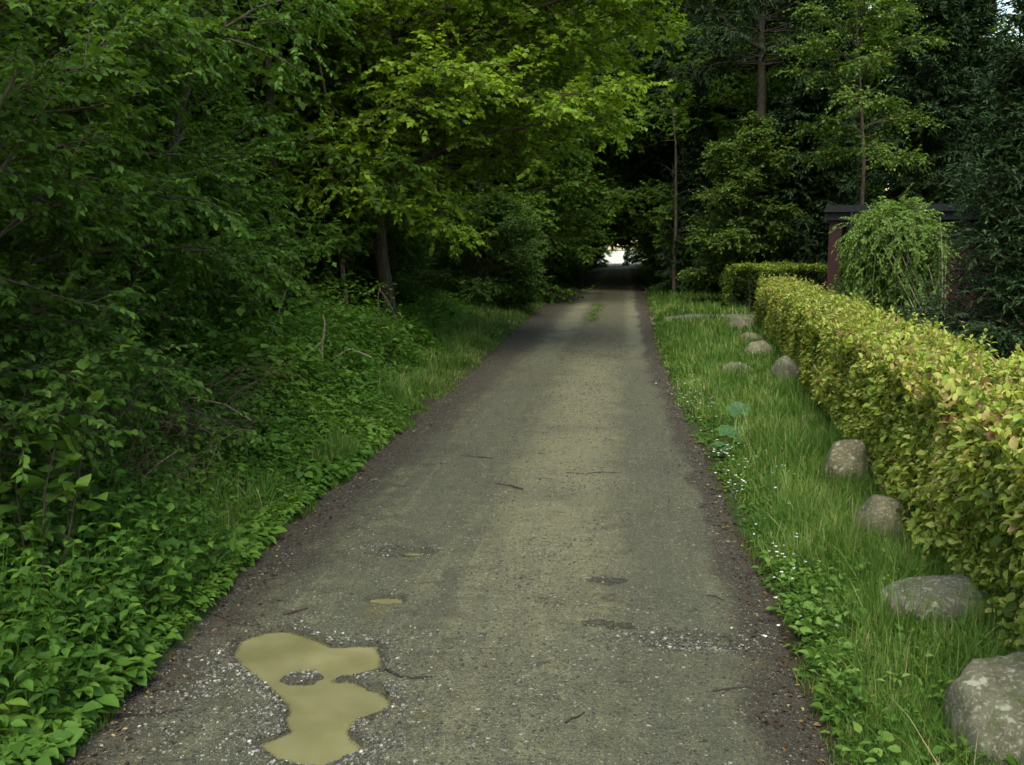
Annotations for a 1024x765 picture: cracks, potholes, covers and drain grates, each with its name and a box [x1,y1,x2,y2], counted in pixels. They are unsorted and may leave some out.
pothole [363,545,440,558]
pothole [223,624,408,765]
crack [378,667,433,679]
pothole [361,593,408,605]
